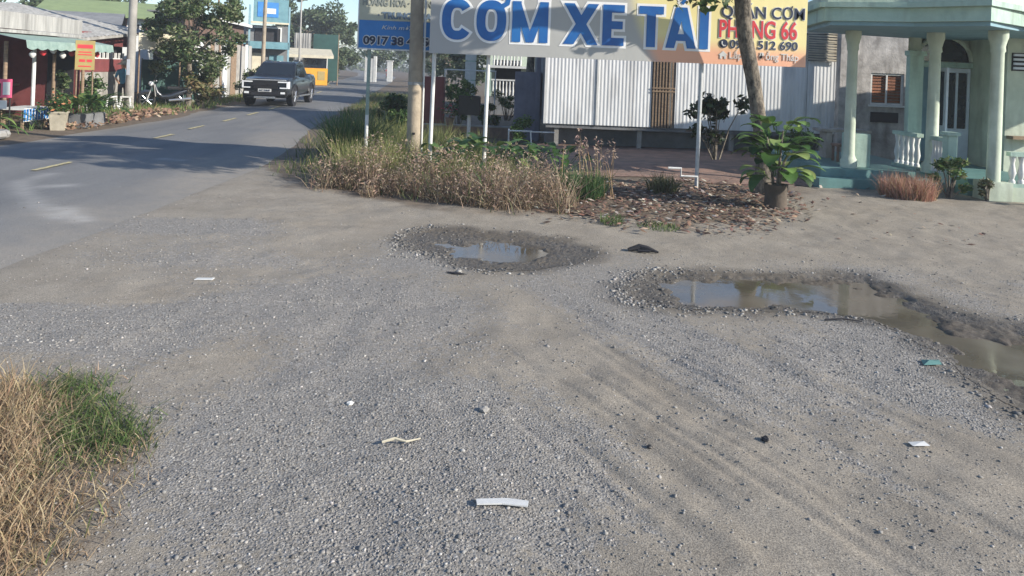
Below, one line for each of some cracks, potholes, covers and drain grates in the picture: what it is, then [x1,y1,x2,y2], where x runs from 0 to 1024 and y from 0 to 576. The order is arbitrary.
pothole [622,270,1024,410]
pothole [400,227,601,272]
